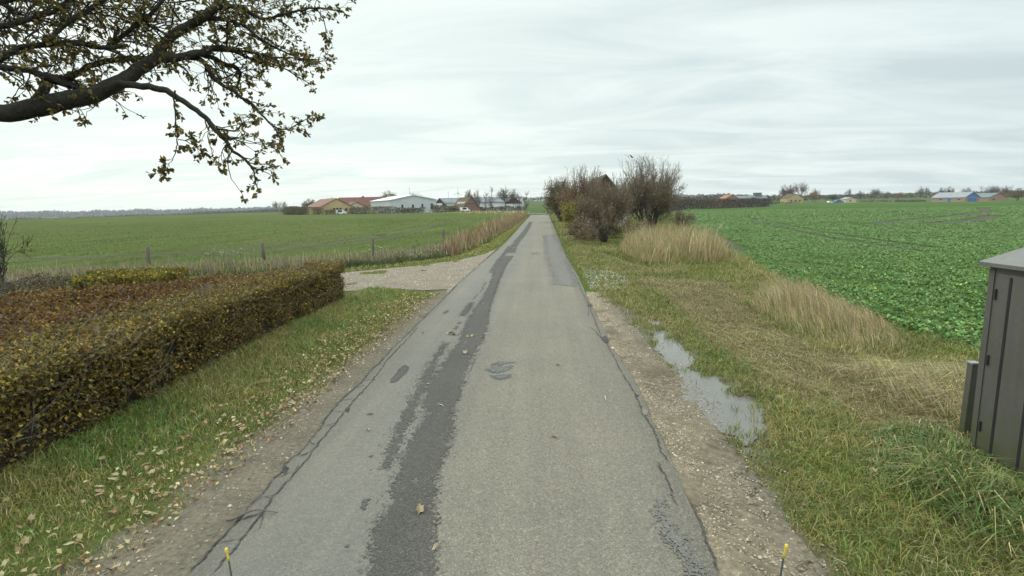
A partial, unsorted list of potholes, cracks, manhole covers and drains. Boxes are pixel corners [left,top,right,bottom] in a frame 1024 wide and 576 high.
crack [573,272,720,572]
crack [190,269,487,572]
